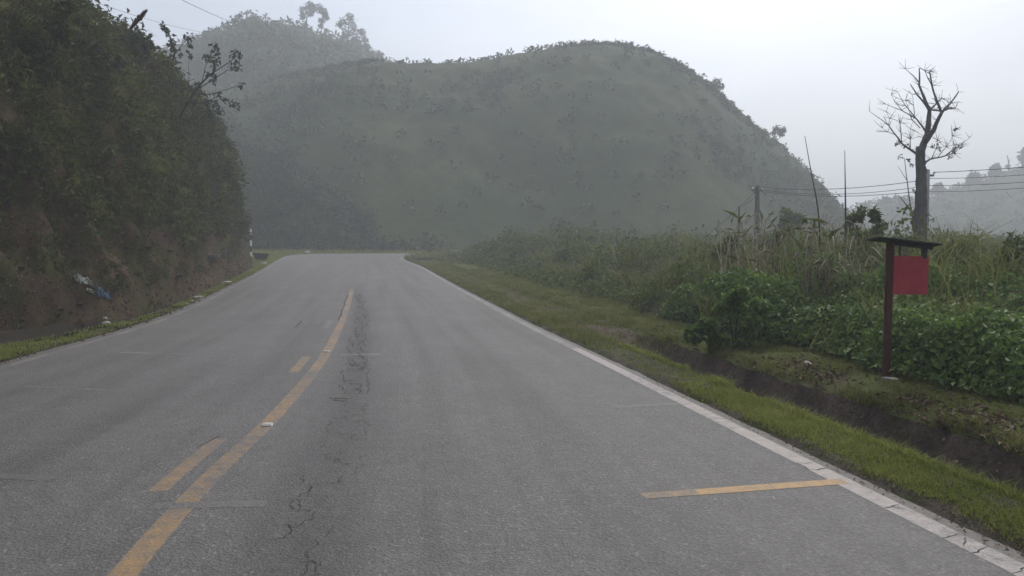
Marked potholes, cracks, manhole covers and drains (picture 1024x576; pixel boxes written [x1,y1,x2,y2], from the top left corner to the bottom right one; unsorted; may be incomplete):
crack [281,294,371,575]
